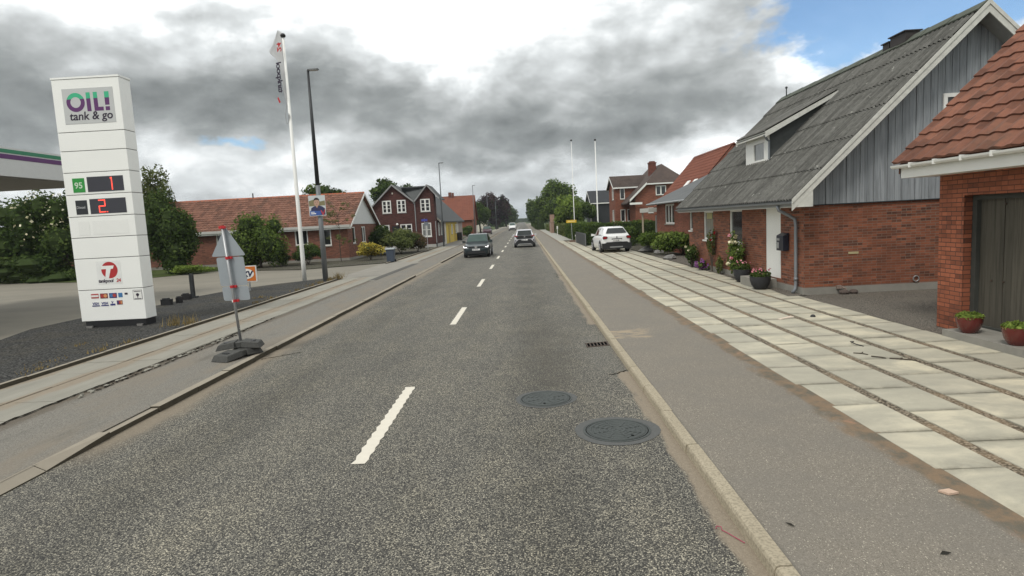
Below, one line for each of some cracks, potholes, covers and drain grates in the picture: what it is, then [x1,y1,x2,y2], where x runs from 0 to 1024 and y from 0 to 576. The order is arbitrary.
manhole cover [575,417,661,445]
manhole cover [516,390,577,408]
